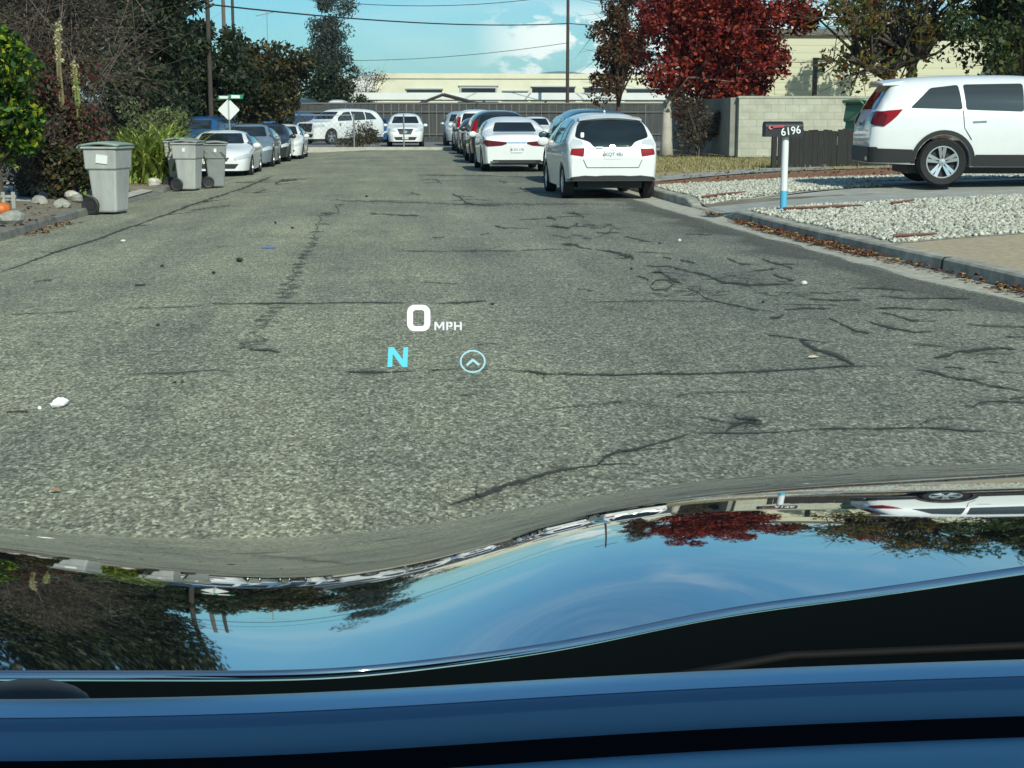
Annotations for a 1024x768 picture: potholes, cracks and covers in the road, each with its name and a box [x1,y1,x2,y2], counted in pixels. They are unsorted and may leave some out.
crack [129,207,404,374]
crack [450,212,1024,505]
